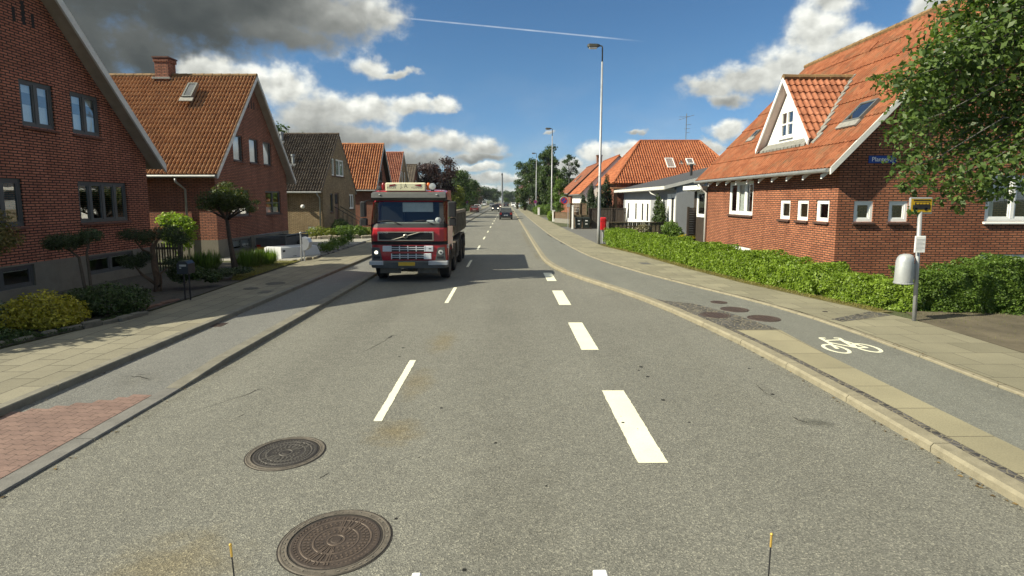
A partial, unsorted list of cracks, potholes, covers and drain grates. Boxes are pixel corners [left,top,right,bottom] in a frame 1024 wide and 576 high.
manhole cover [276,509,393,576]
manhole cover [244,436,326,471]
